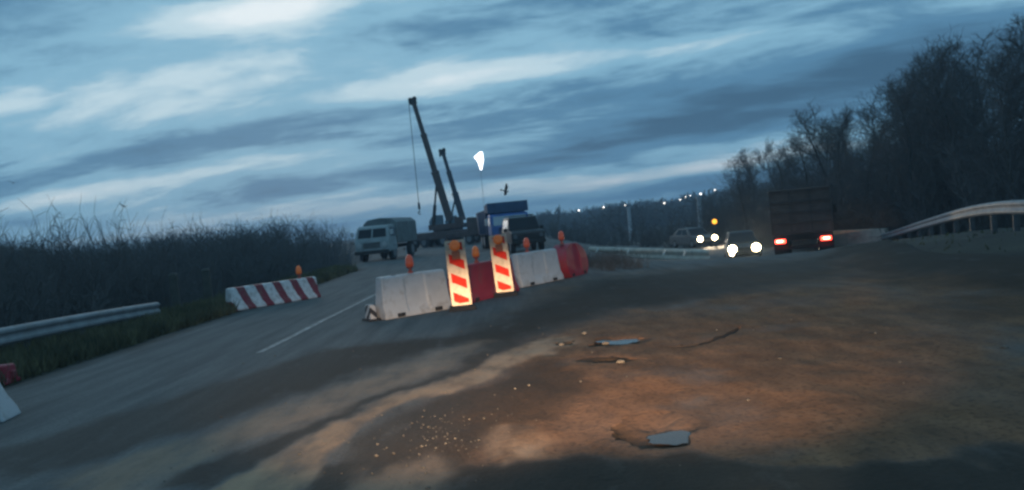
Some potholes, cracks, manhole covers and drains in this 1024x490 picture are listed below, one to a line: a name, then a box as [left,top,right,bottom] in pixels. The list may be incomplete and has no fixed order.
pothole [559,352,655,366]
crack [659,325,758,351]
pothole [573,332,669,349]
